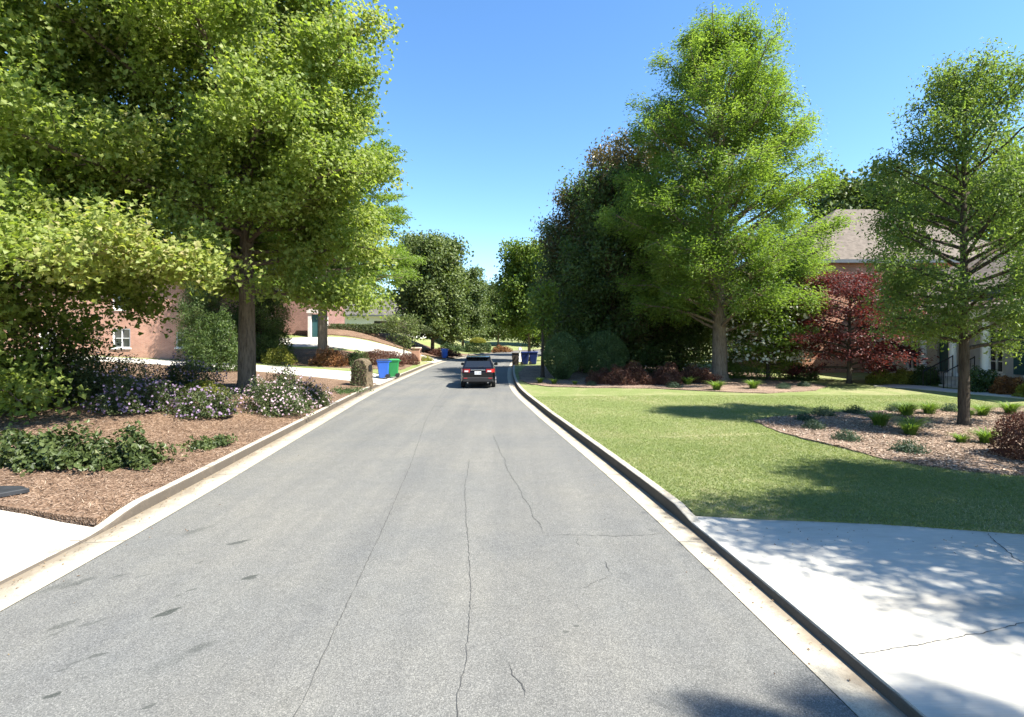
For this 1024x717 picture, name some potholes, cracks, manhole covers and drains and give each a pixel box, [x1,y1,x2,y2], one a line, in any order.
crack [456,465,471,717]
crack [495,440,659,547]
crack [851,622,1024,655]
